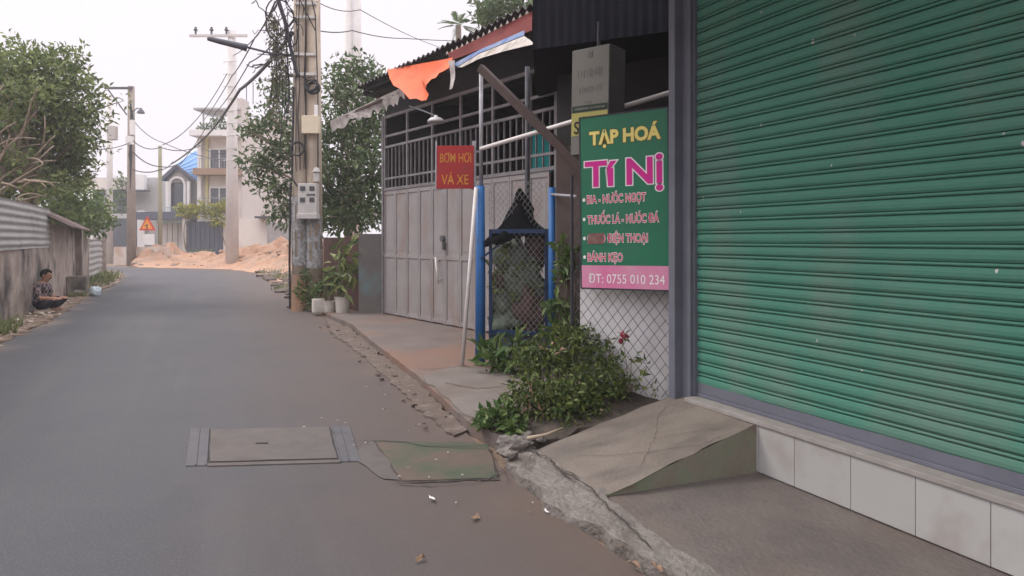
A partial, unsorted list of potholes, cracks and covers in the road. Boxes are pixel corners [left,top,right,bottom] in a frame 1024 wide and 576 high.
manhole cover [186,425,361,467]
